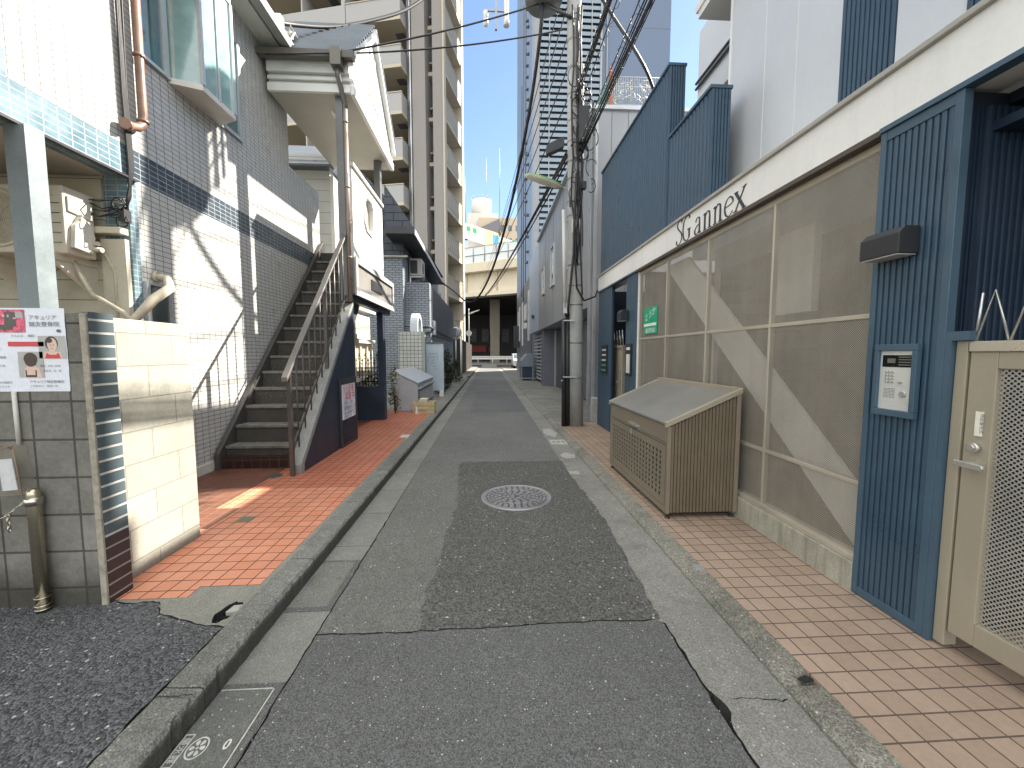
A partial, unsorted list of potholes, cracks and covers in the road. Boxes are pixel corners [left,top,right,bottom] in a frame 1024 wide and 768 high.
crack [664,624,788,768]
pothole [212,601,243,627]
manhole cover [481,485,552,511]
utility cover [160,682,286,768]
